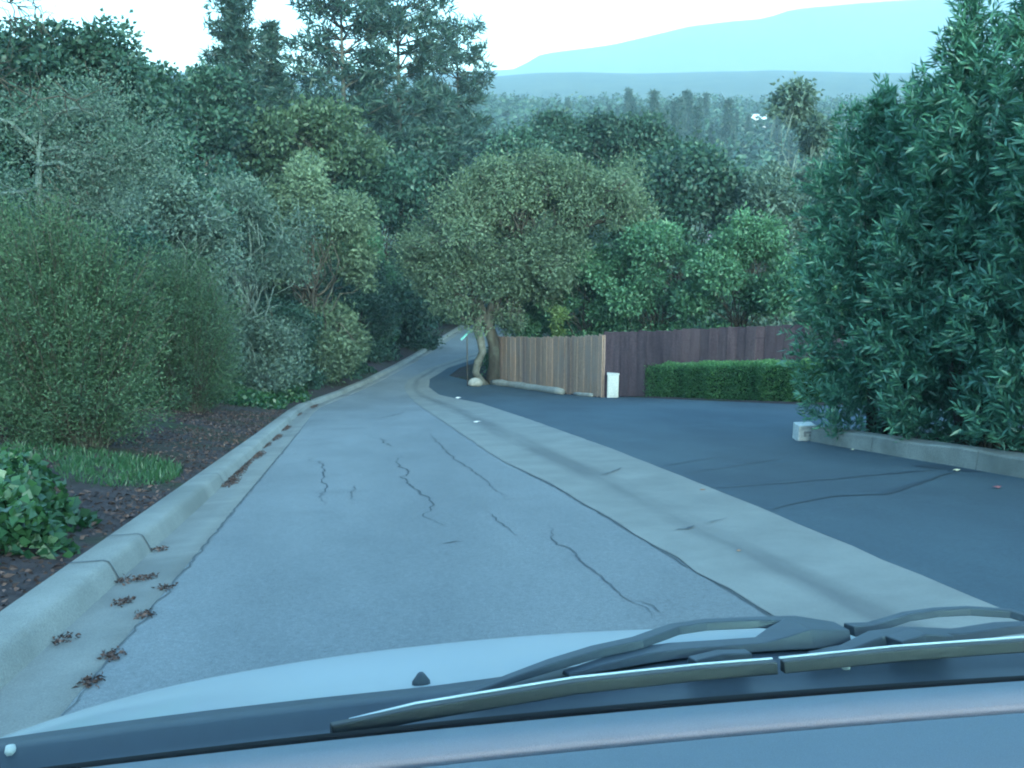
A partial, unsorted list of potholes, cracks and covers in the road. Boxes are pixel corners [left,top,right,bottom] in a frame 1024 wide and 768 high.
crack [380,438,462,543]
crack [550,527,660,622]
crack [308,457,328,504]
crack [430,433,516,535]
